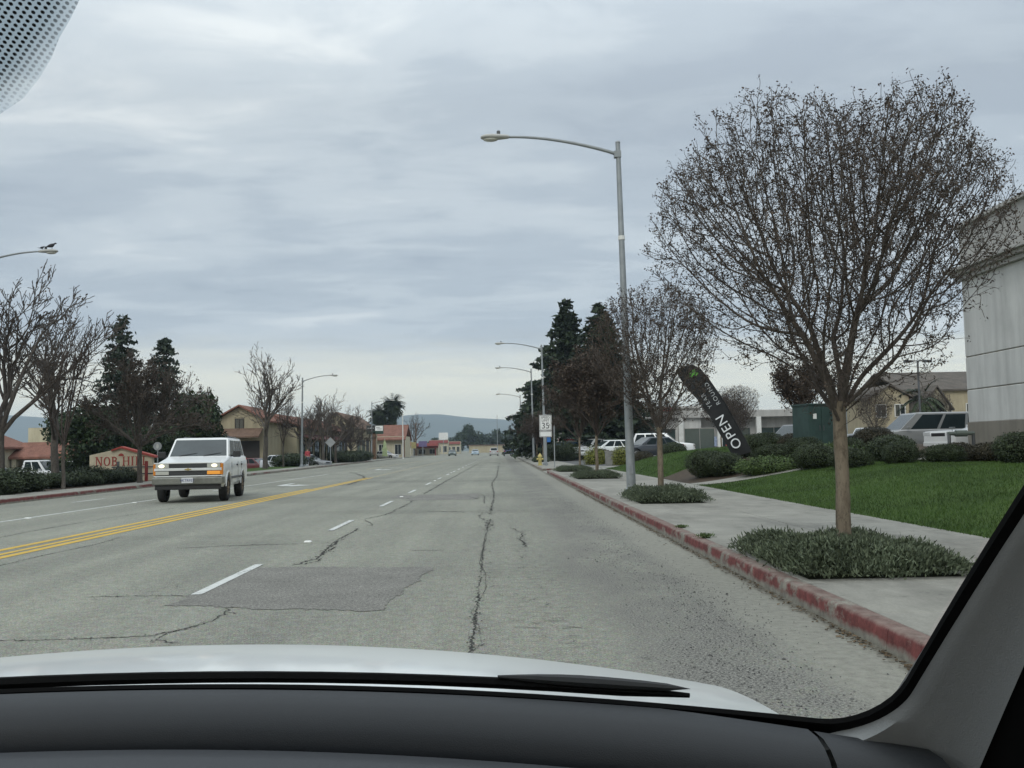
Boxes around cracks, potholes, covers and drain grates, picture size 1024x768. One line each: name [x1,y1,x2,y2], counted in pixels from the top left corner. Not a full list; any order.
crack [190,463,654,669]
crack [0,606,236,643]
